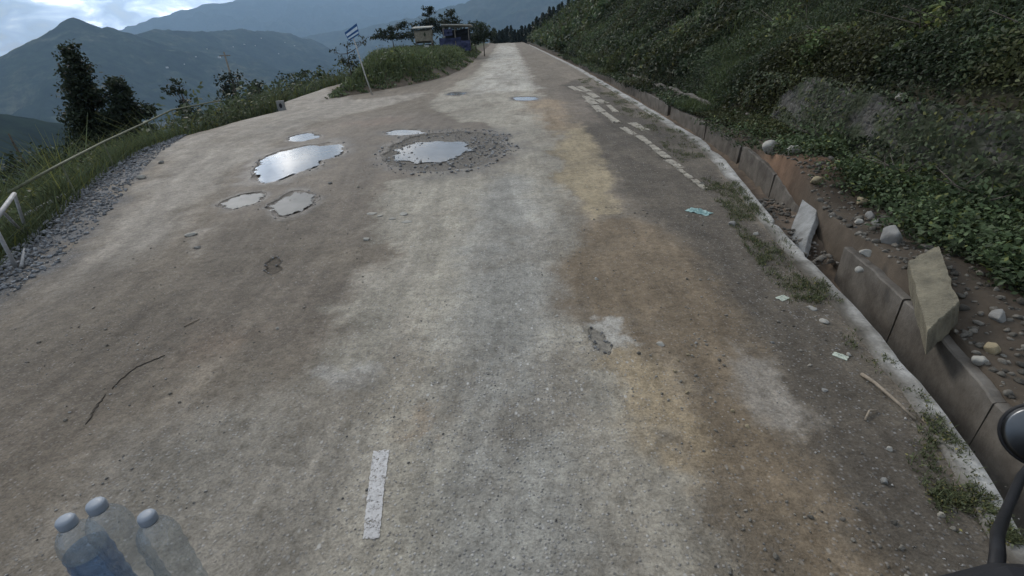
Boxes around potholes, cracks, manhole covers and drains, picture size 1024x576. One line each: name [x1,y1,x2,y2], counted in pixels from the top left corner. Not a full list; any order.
pothole [263,256,283,275]
pothole [588,326,612,355]
pothole [263,189,321,219]
pothole [247,141,350,186]
pothole [287,132,322,142]
pothole [215,191,267,210]
crack [85,355,165,424]
pothole [373,128,519,176]
